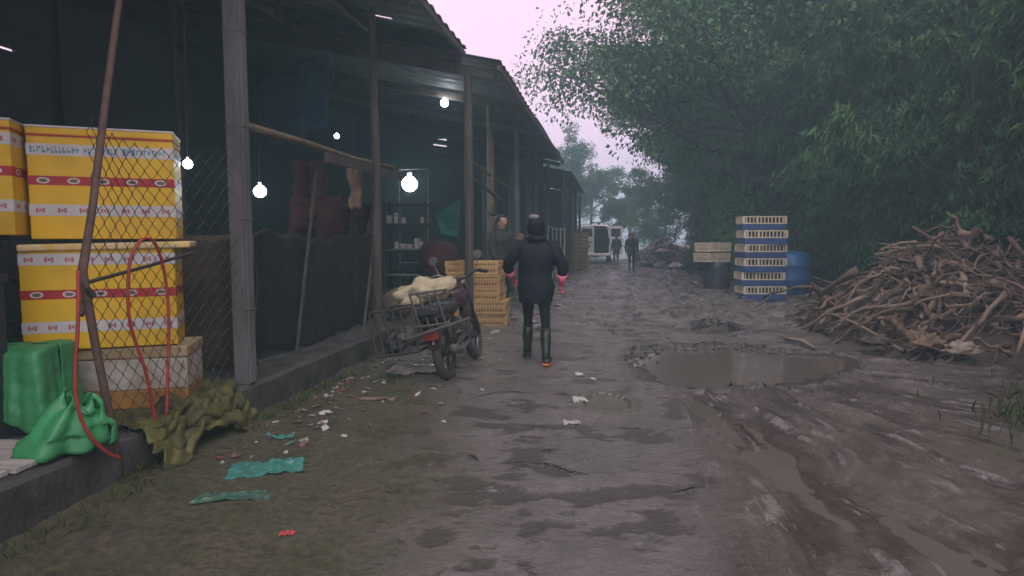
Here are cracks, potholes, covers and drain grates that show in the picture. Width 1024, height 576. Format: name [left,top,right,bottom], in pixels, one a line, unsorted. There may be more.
crack [506,448,589,475]
crack [666,486,703,495]
pothole [683,319,754,338]
pothole [613,341,873,395]
